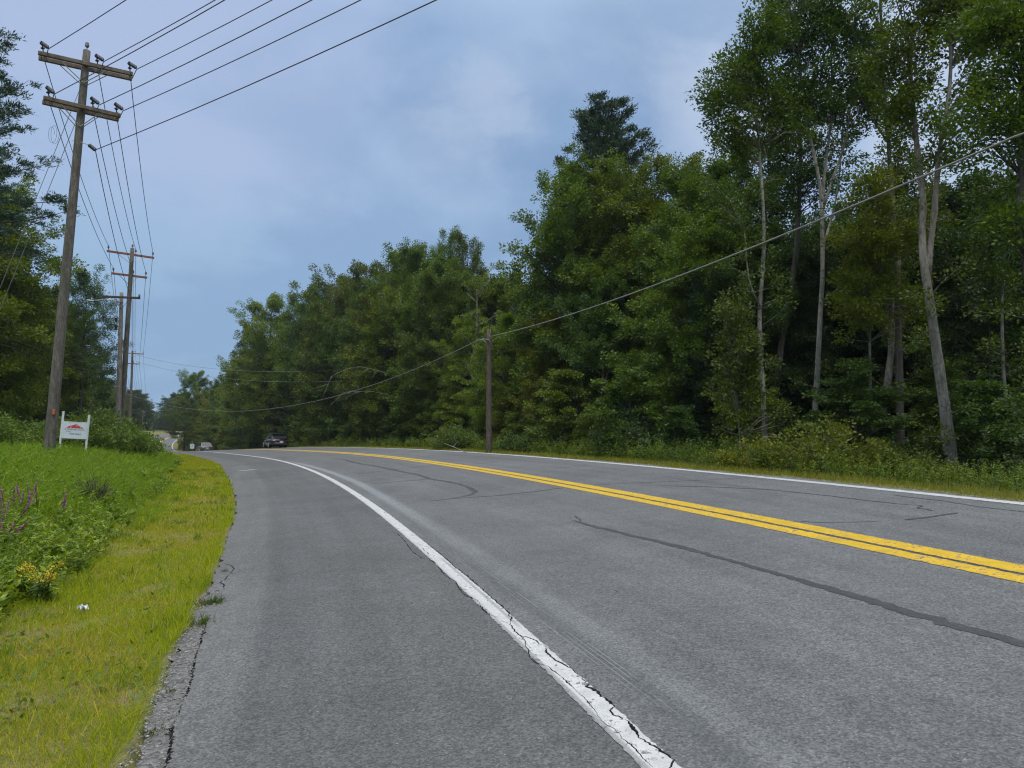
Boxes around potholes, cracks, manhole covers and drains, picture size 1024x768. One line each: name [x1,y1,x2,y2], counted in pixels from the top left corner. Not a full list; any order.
crack [394,532,675,768]
